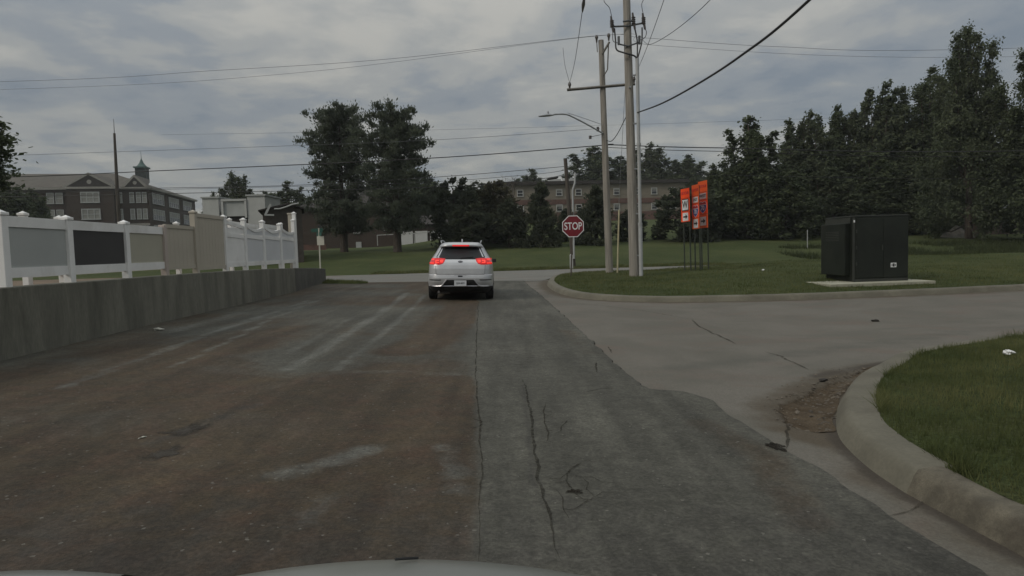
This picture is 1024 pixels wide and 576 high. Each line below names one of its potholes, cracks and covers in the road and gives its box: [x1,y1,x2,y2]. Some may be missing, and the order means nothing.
pothole [158,424,208,436]
crack [525,385,616,556]
pothole [150,446,180,459]
pothole [778,367,872,433]
pothole [765,442,787,452]
